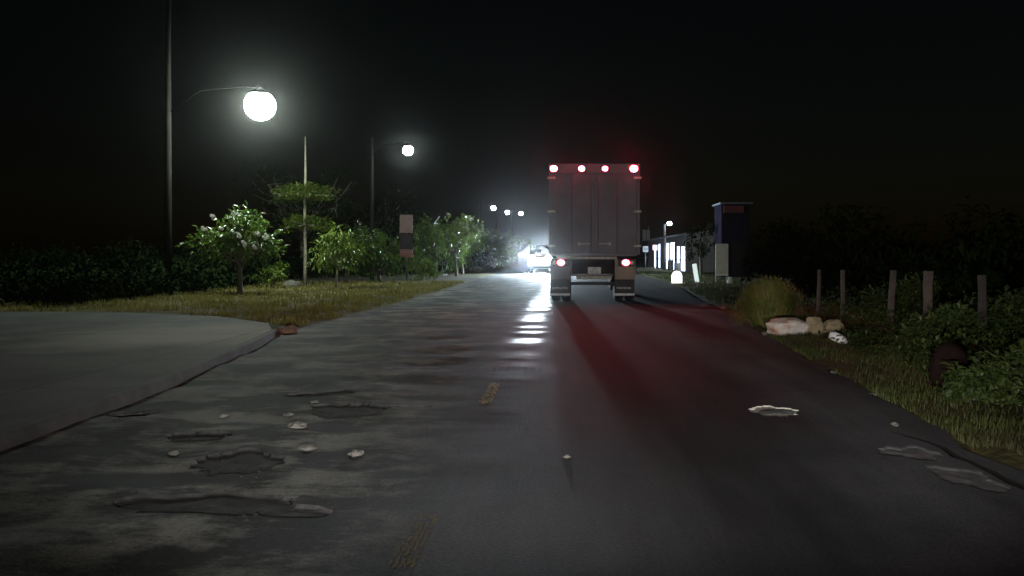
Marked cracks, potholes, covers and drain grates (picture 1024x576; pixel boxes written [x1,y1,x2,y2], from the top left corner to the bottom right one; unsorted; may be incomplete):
pothole [878,445,943,461]
pothole [164,430,237,443]
pothole [749,405,799,417]
pothole [183,447,291,478]
pothole [283,389,358,398]
pothole [925,465,1012,493]
pothole [310,401,400,421]
pothole [97,489,352,521]
